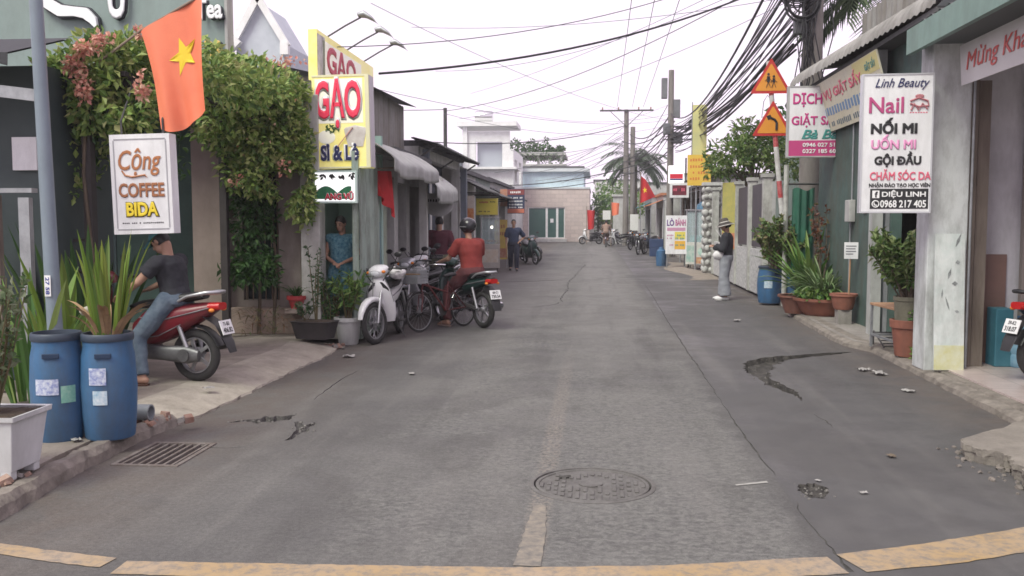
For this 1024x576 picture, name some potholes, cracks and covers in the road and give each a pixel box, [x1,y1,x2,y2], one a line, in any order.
manhole cover [529,467,656,504]
pothole [284,421,317,441]
pothole [797,483,836,500]
drain grate [110,441,217,467]
crack [513,265,586,308]
pothole [743,352,850,401]
